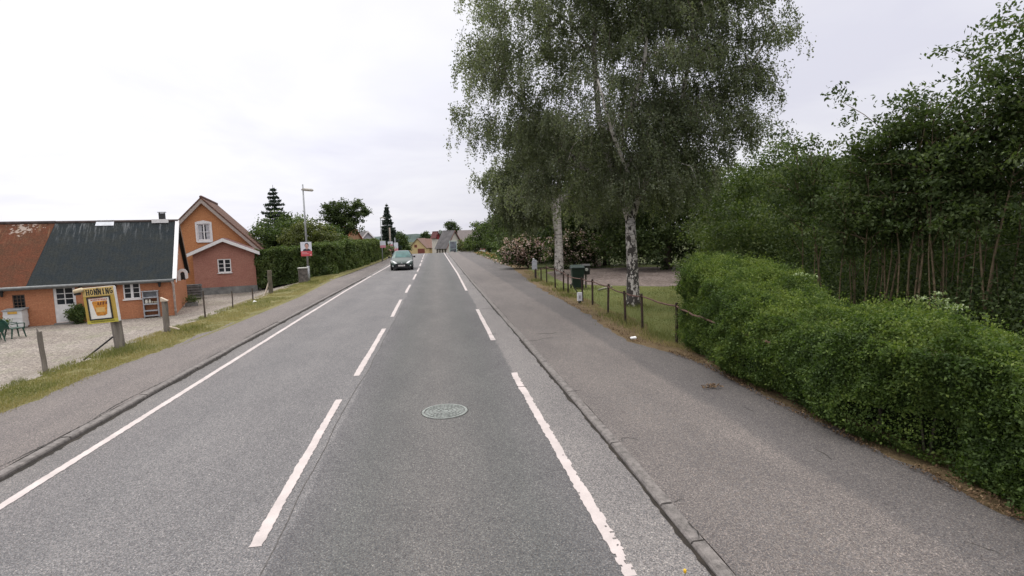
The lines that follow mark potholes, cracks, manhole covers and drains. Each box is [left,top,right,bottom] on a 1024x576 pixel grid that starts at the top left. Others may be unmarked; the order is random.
manhole cover [421,404,468,419]
